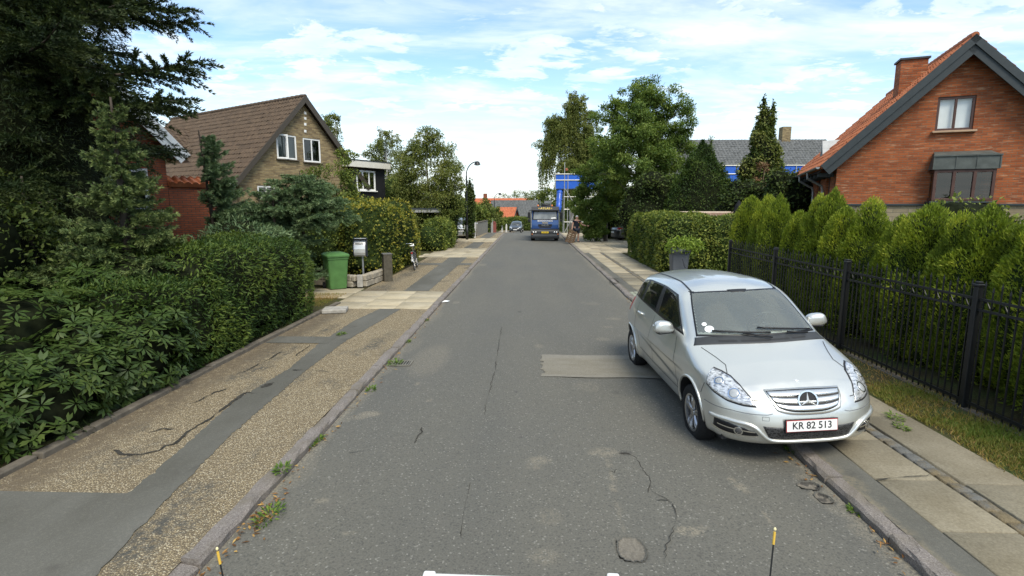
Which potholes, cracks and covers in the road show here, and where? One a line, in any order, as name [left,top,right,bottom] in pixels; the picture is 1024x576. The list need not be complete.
pothole [796,481,821,491]
pothole [616,535,647,563]
crack [114,345,310,455]
pothole [814,491,834,504]
crack [612,452,677,559]
